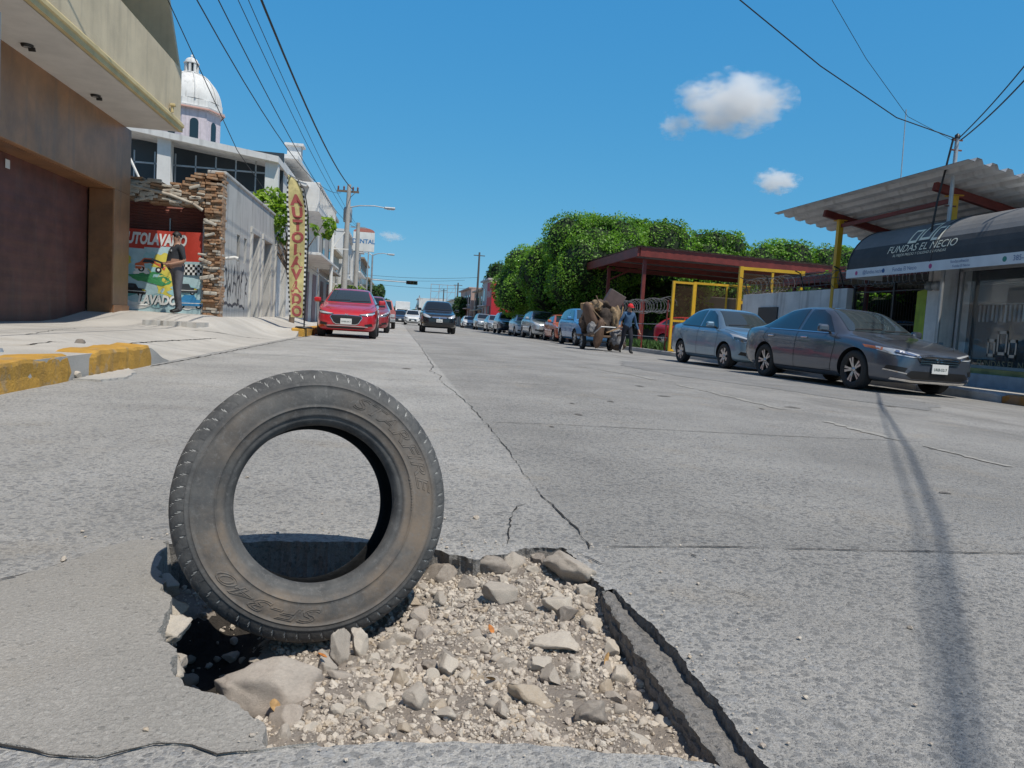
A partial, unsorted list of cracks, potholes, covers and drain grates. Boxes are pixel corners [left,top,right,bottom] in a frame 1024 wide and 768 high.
pothole [169,541,722,768]
